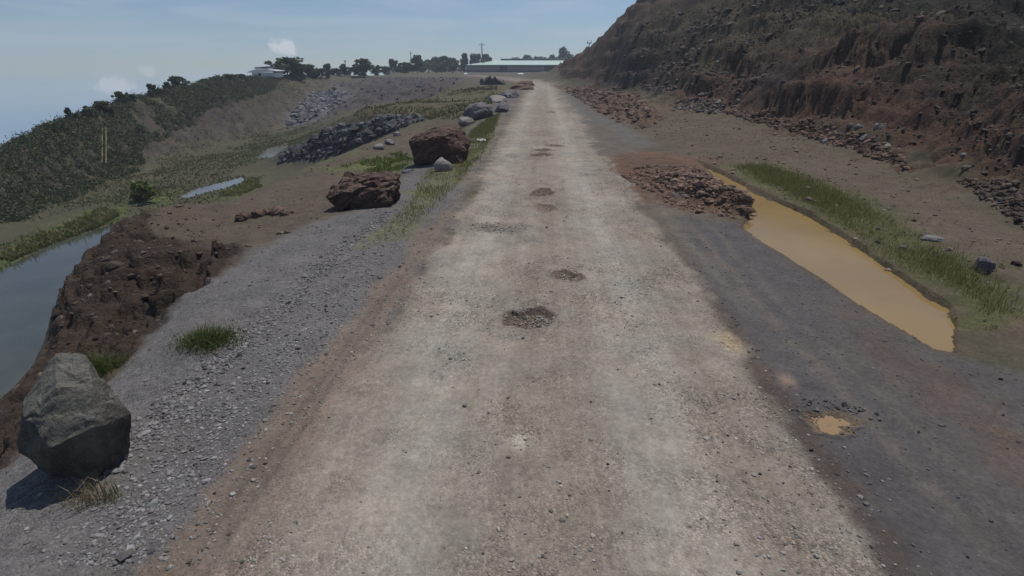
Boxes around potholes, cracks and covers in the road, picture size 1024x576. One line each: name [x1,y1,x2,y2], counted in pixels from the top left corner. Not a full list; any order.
pothole [497,305,563,332]
pothole [548,268,589,283]
pothole [527,187,557,197]
pothole [790,397,882,440]
pothole [533,203,559,214]
